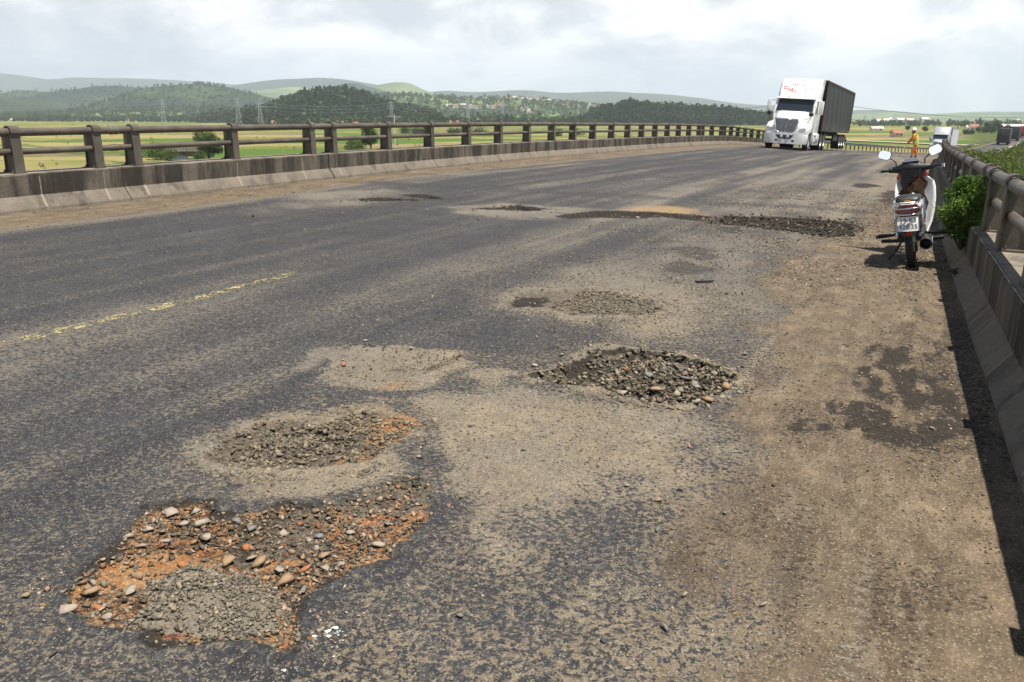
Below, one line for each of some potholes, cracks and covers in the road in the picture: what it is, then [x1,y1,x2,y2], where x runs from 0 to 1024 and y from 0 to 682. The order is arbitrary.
pothole [520,343,756,410]
pothole [166,401,438,492]
pothole [489,287,682,327]
pothole [467,204,550,212]
pothole [701,213,865,239]
pothole [390,193,451,201]
pothole [546,210,725,224]
pothole [34,469,464,669]
